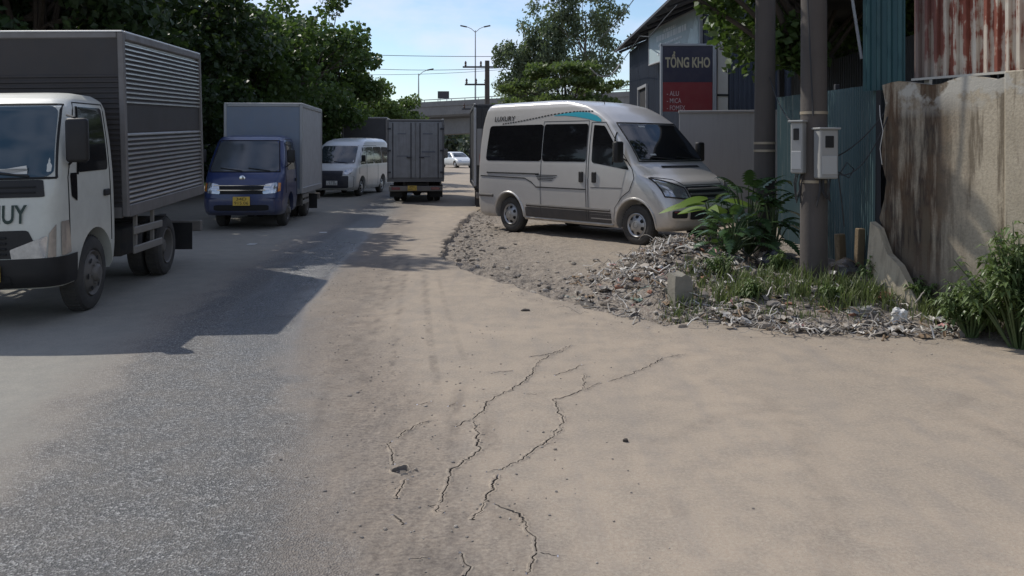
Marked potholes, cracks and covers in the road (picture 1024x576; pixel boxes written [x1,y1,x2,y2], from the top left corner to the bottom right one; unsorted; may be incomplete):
crack [384,345,684,576]
